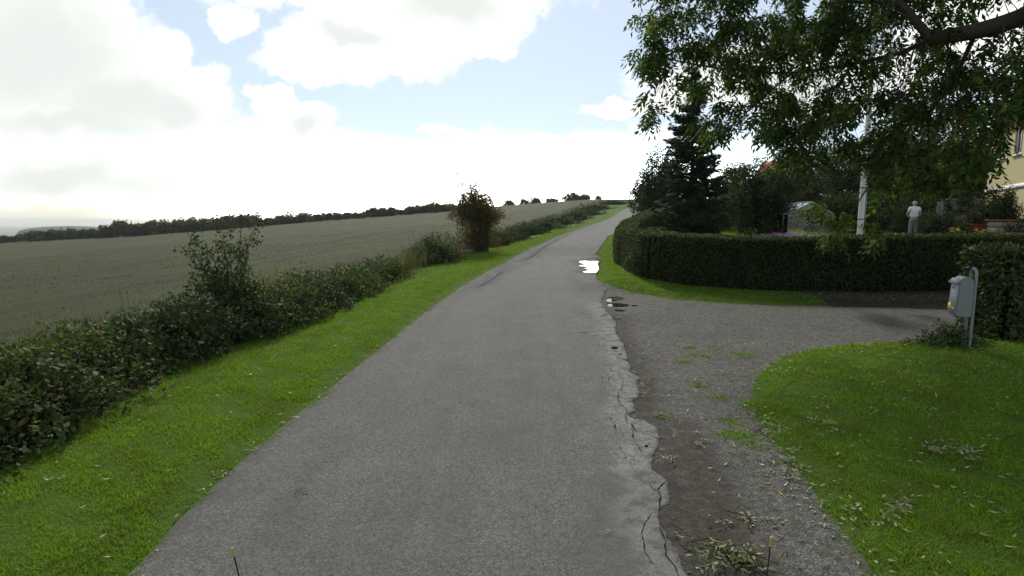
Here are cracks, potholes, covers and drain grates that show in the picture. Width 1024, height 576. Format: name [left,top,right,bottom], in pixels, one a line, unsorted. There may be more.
crack [601,359,642,453]
crack [641,482,679,576]
